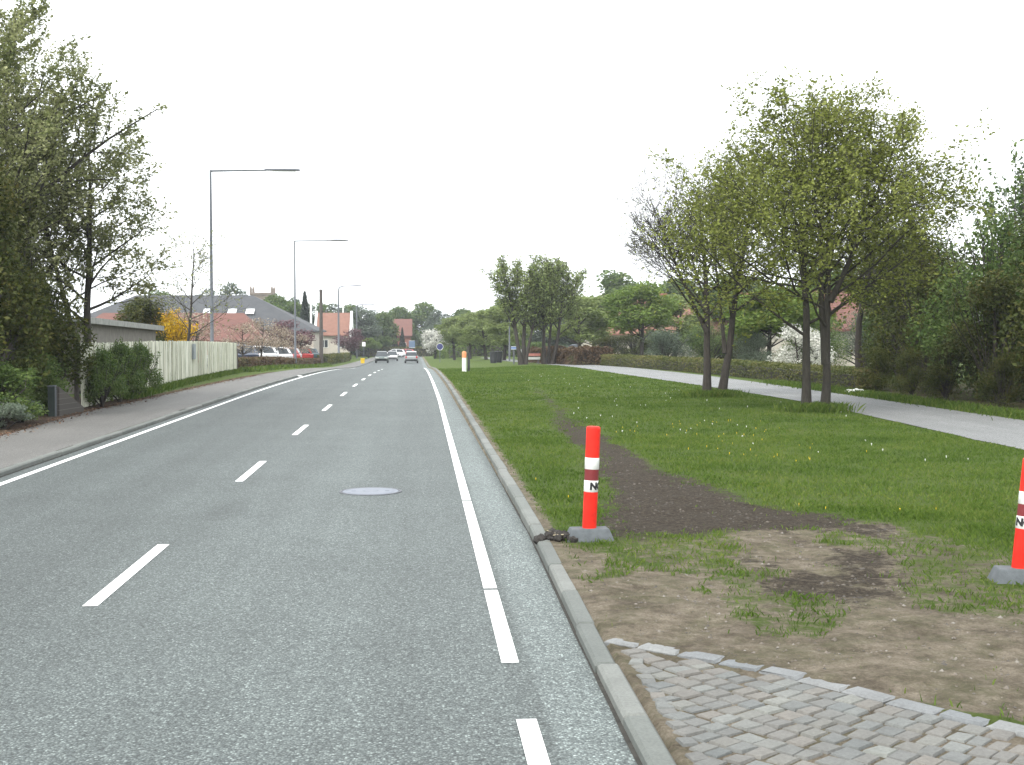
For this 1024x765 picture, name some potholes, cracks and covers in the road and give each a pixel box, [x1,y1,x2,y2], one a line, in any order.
manhole cover [339,487,402,496]
